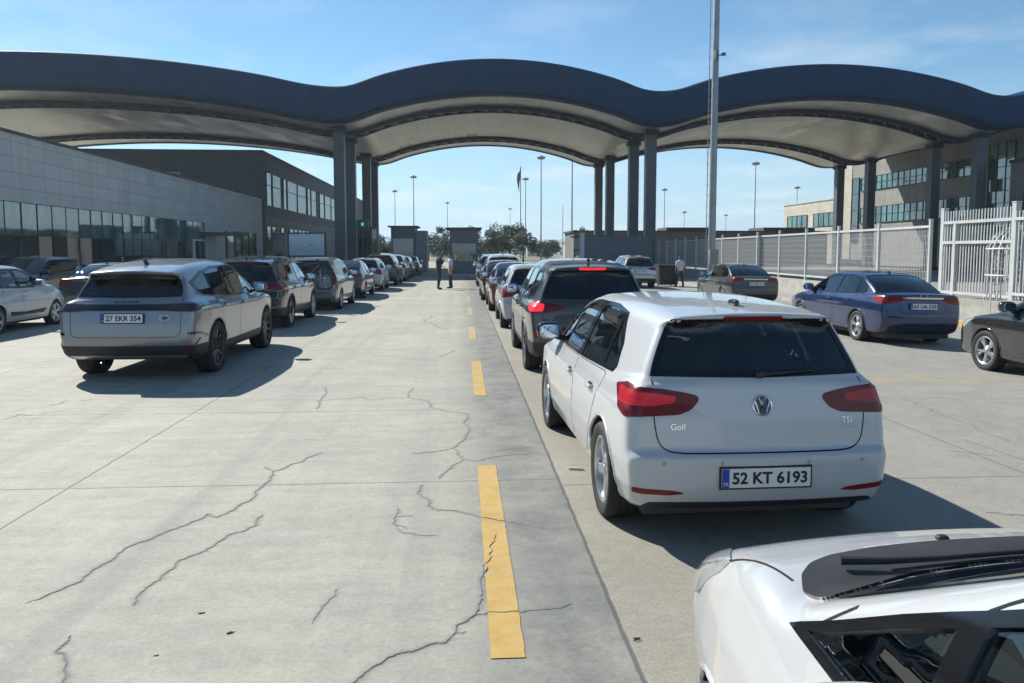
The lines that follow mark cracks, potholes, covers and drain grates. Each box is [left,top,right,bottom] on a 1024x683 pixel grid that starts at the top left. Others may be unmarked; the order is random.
crack [25,452,322,606]
crack [321,389,518,477]
crack [312,486,571,683]
crack [55,635,71,683]
